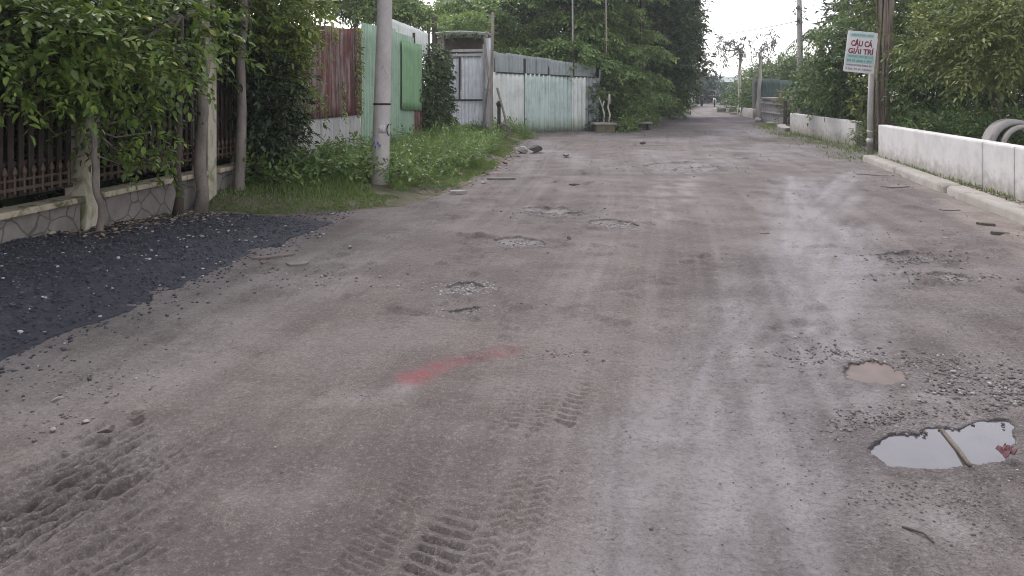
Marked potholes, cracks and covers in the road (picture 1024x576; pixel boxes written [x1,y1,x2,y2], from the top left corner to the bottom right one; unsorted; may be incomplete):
pothole [822,353,934,395]
pothole [576,217,649,231]
pothole [430,277,499,303]
pothole [910,268,992,287]
pothole [425,301,496,322]
pothole [484,234,557,250]
pothole [862,248,955,269]
pothole [839,411,1024,483]
pothole [630,160,734,176]
pothole [510,204,600,219]
